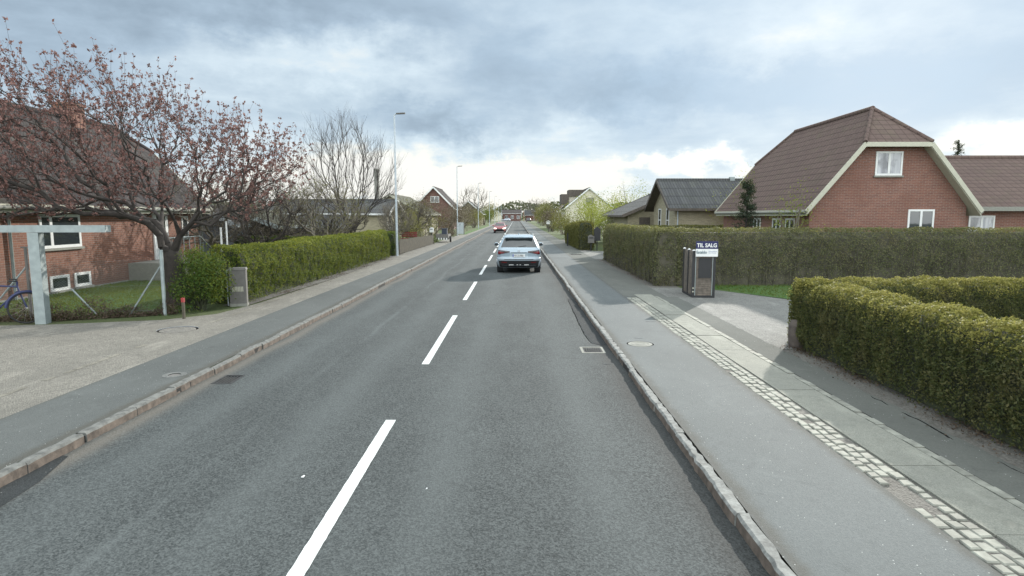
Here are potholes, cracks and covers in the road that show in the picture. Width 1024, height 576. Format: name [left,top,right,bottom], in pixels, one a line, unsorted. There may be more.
crack [871,396,1024,474]
